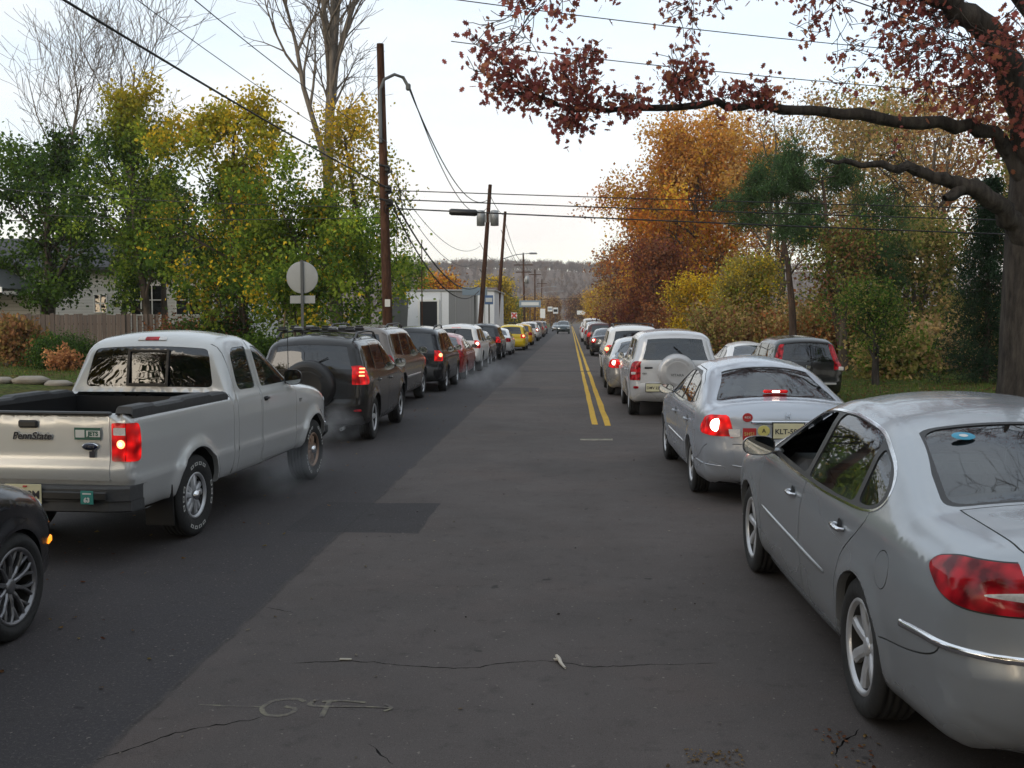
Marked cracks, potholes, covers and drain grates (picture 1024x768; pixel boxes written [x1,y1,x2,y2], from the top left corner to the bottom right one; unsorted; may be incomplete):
crack [95,718,257,761]
crack [303,660,709,669]
crack [835,729,859,757]
